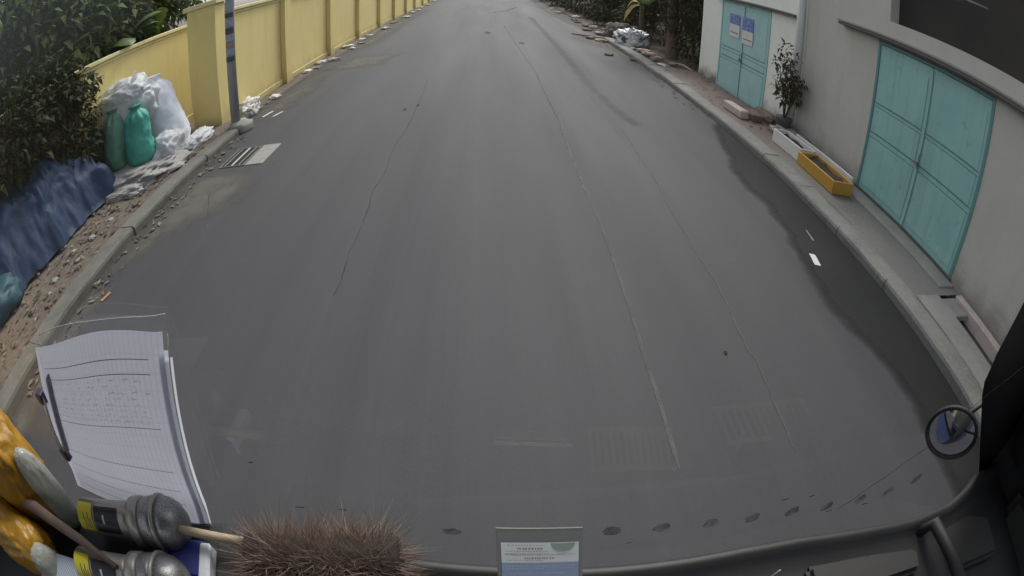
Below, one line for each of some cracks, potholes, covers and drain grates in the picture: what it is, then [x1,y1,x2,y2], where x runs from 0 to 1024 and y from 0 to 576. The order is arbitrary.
drain grate [218,146,263,169]
crack [333,82,427,296]
crack [621,129,794,449]
